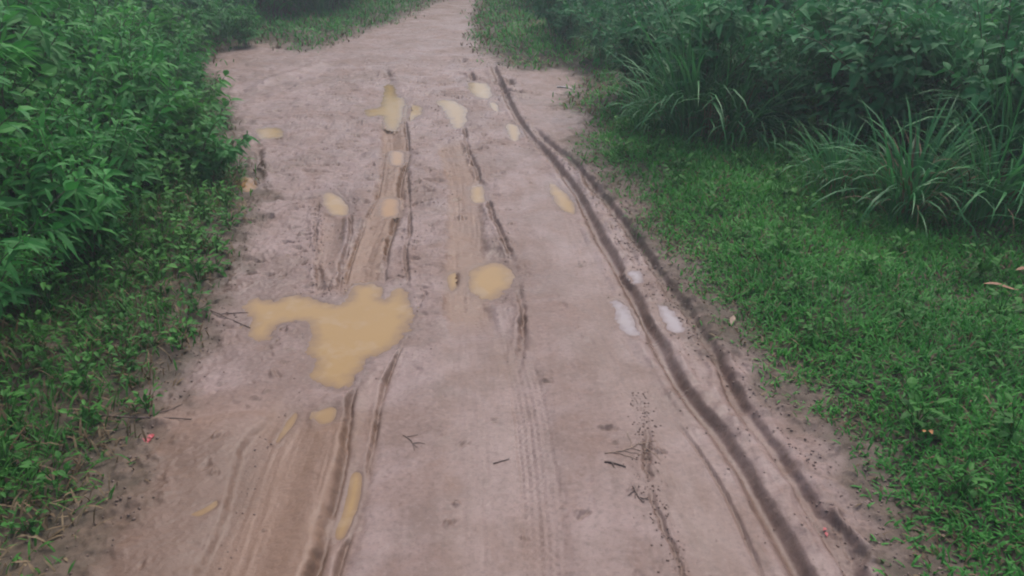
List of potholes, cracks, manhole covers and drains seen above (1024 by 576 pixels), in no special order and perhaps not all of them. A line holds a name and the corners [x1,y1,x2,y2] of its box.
pothole [357,82,412,136]
pothole [230,278,426,393]
pothole [456,254,530,305]
